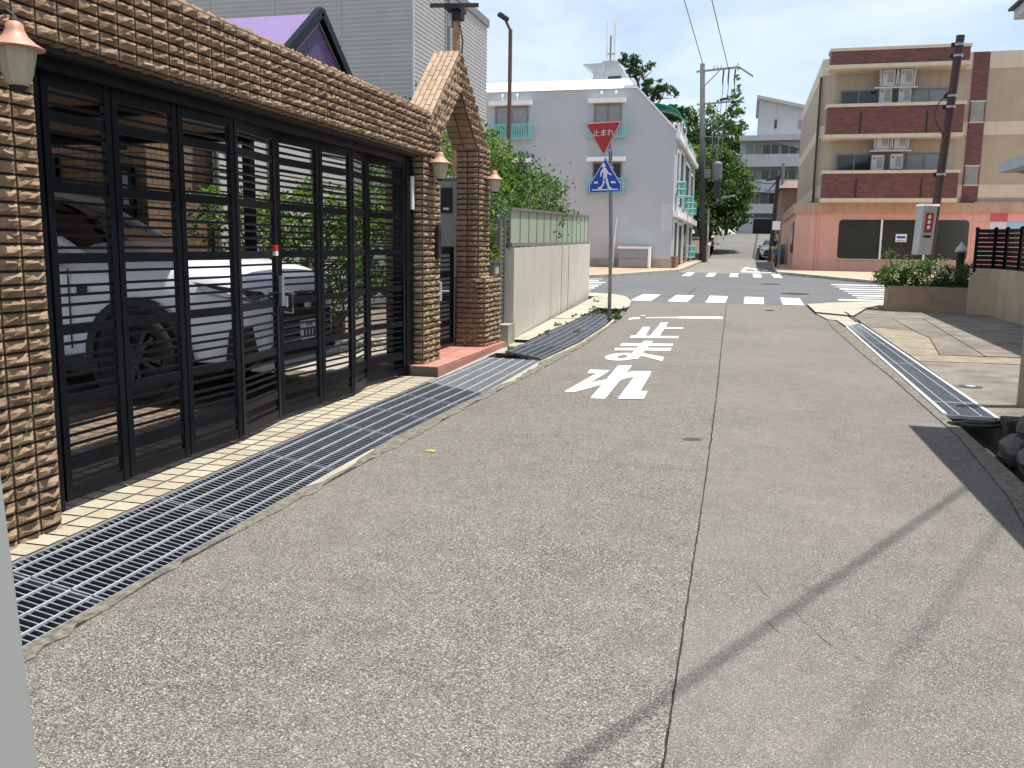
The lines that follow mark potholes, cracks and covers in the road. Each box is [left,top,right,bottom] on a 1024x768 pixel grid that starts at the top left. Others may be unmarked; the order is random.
drain grate [576,313,615,322]
drain grate [12,498,244,601]
crack [750,579,894,667]
drain grate [263,422,395,470]
drain grate [890,362,971,403]
drain grate [864,343,916,364]
drain grate [561,320,607,330]
drain grate [505,344,565,360]
drain grate [402,382,482,405]
drain grate [429,370,515,393]
drain grate [934,401,996,421]
drain grate [524,335,584,349]
